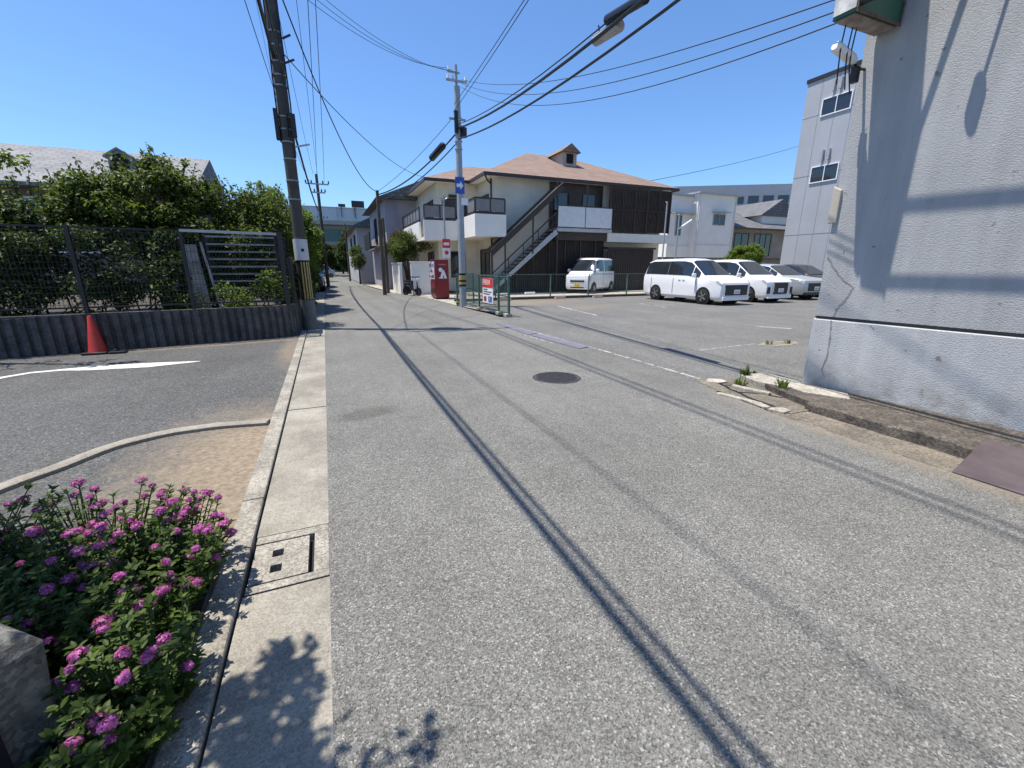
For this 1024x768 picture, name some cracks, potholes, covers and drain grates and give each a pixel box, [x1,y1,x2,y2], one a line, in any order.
manhole cover [533,372,581,384]
